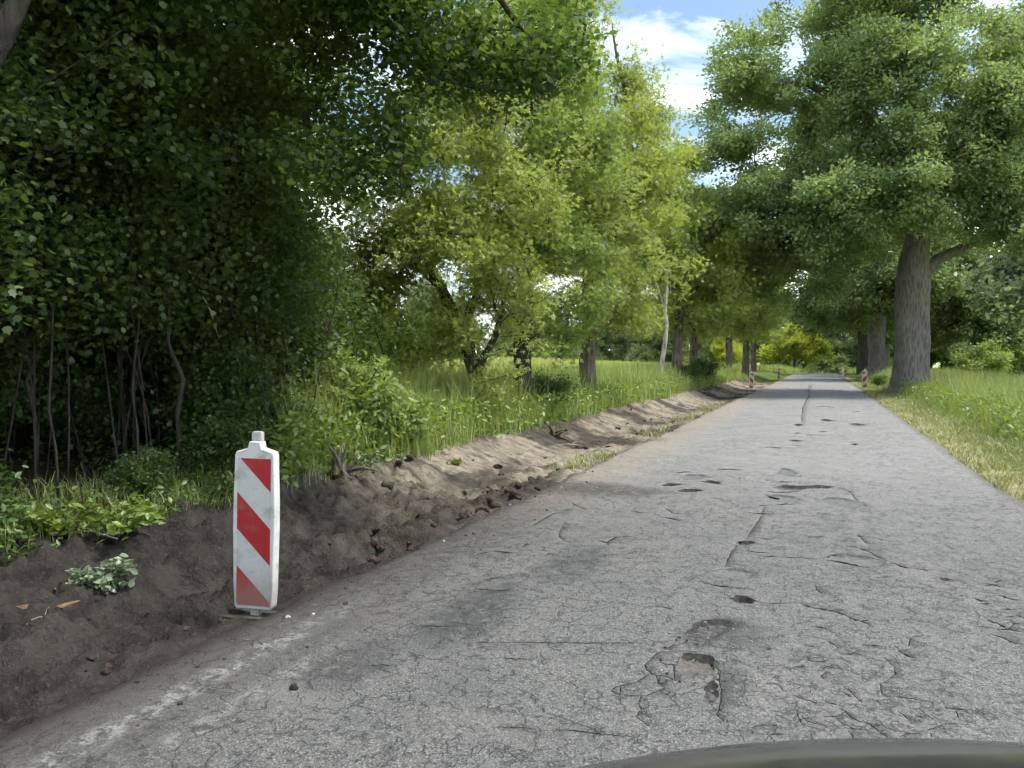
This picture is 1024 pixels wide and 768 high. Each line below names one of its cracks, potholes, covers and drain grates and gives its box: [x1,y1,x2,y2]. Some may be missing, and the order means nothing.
crack [475,642,682,737]
pothole [703,680,719,705]
crack [746,535,1023,645]
pothole [682,619,734,648]
pothole [677,653,718,677]
pothole [729,595,758,604]
crack [755,585,966,738]
